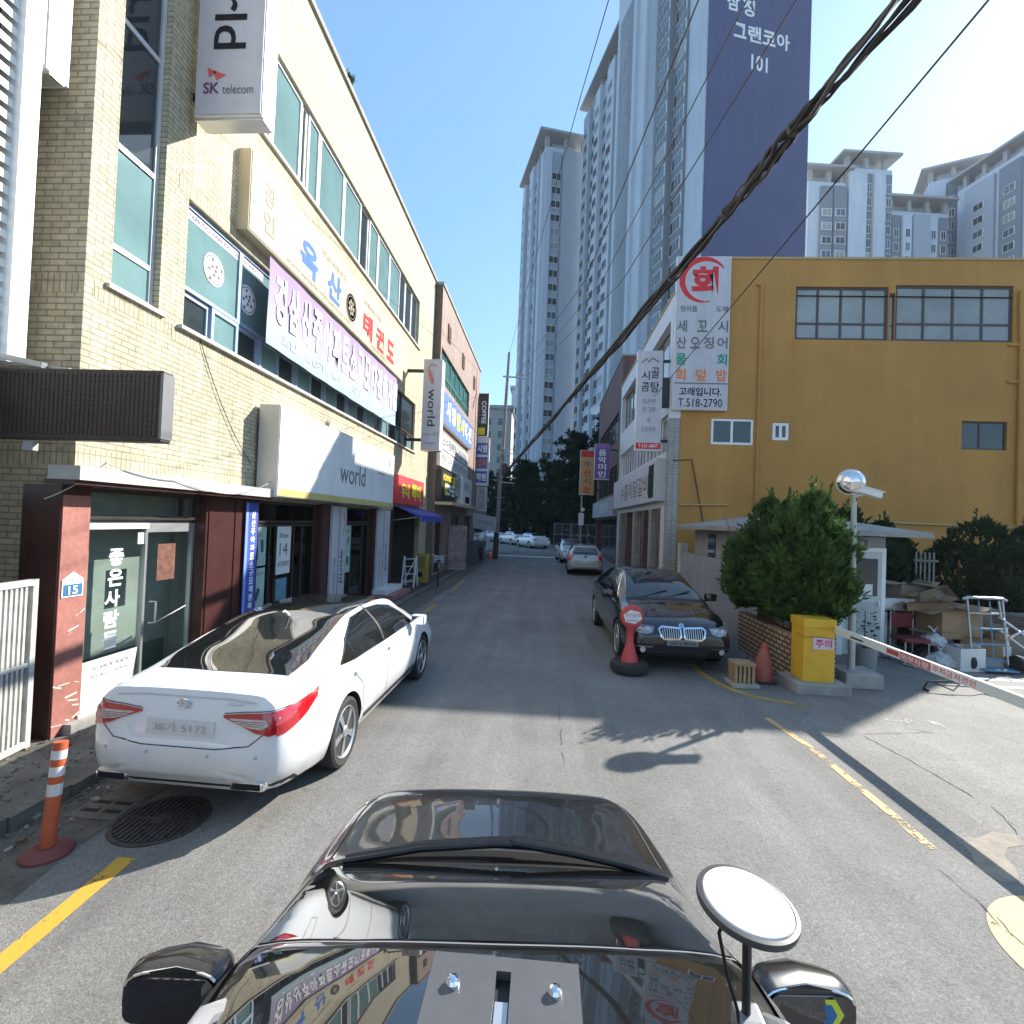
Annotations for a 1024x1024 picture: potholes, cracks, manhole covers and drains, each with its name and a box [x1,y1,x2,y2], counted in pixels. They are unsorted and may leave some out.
drain grate [62,792,151,821]
crack [820,728,973,797]
